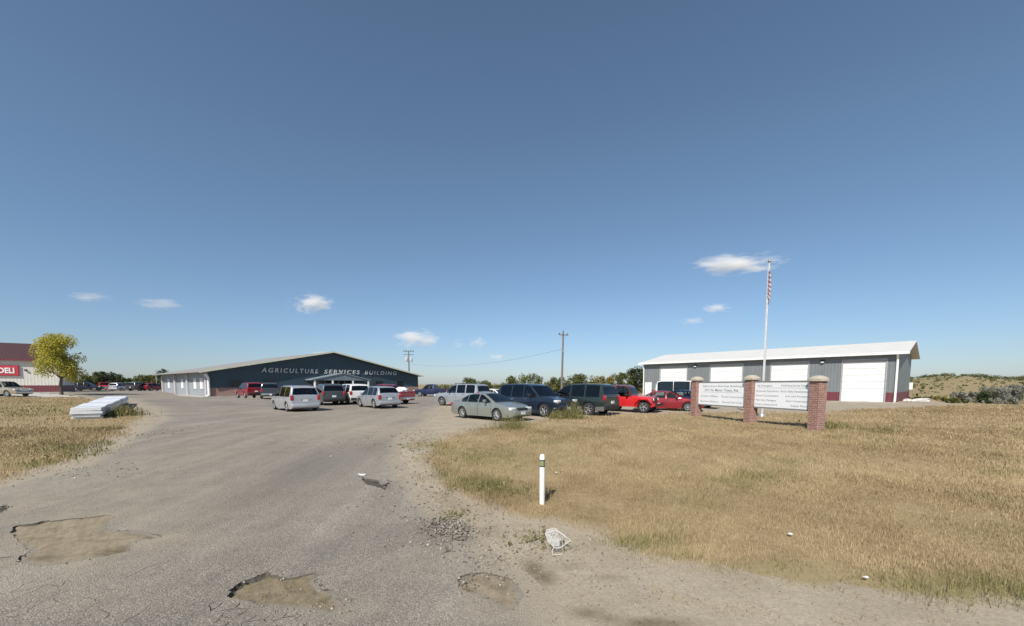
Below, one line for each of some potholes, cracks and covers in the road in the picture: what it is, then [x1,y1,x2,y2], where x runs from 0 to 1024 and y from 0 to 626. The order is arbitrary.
pothole [362,477,391,490]
pothole [10,515,161,566]
pothole [458,572,524,611]
crack [2,563,159,626]
pothole [227,571,346,614]
crack [205,601,307,626]
